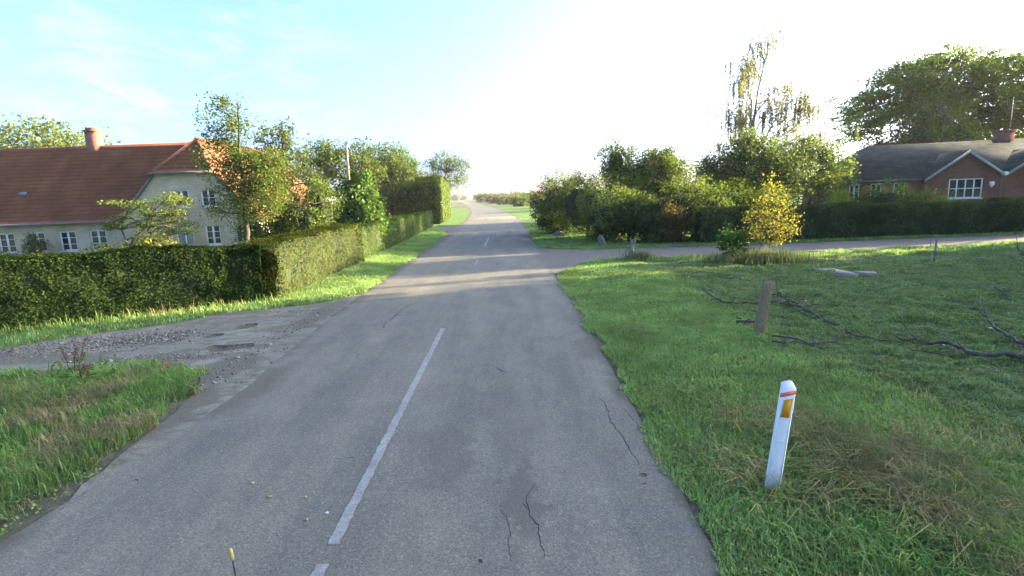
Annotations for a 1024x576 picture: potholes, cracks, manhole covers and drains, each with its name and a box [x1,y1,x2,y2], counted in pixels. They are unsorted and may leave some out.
crack [604,402,646,466]
pothole [203,342,255,352]
crack [500,484,545,561]
crack [372,304,411,334]
